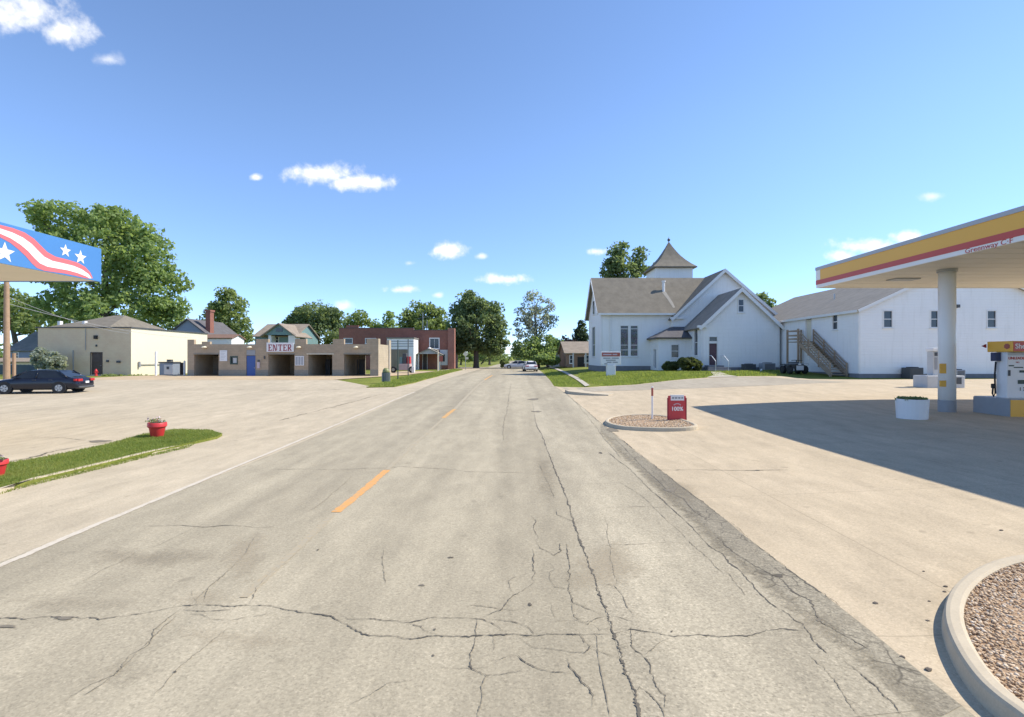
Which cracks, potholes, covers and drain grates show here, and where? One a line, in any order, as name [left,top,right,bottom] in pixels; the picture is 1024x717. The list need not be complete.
crack [4,394,898,717]
